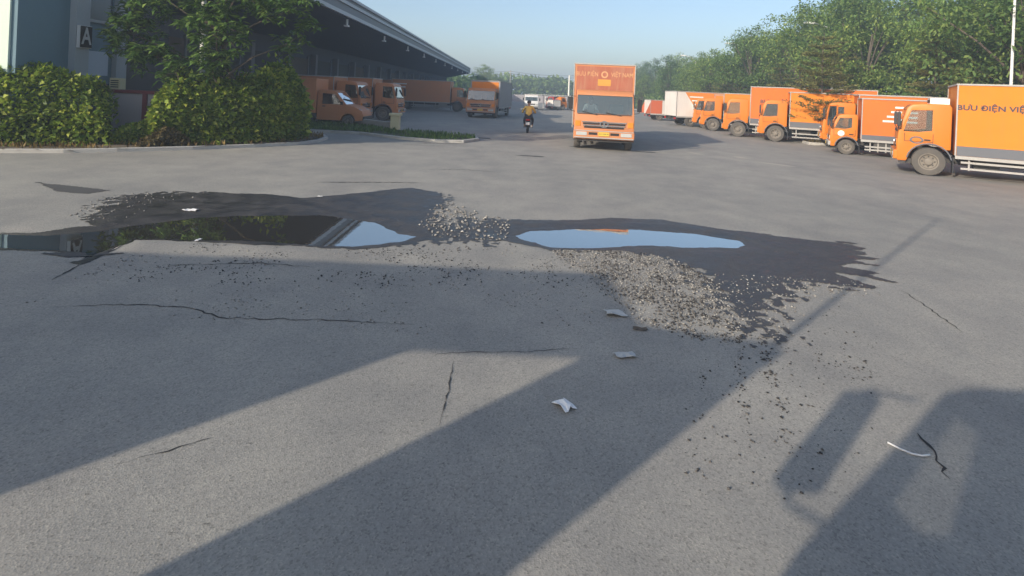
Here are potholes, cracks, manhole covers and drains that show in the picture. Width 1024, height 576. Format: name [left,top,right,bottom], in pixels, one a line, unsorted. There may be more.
crack [429,348,573,422]
pothole [0,188,484,265]
pothole [431,217,898,351]
crack [917,433,950,479]
